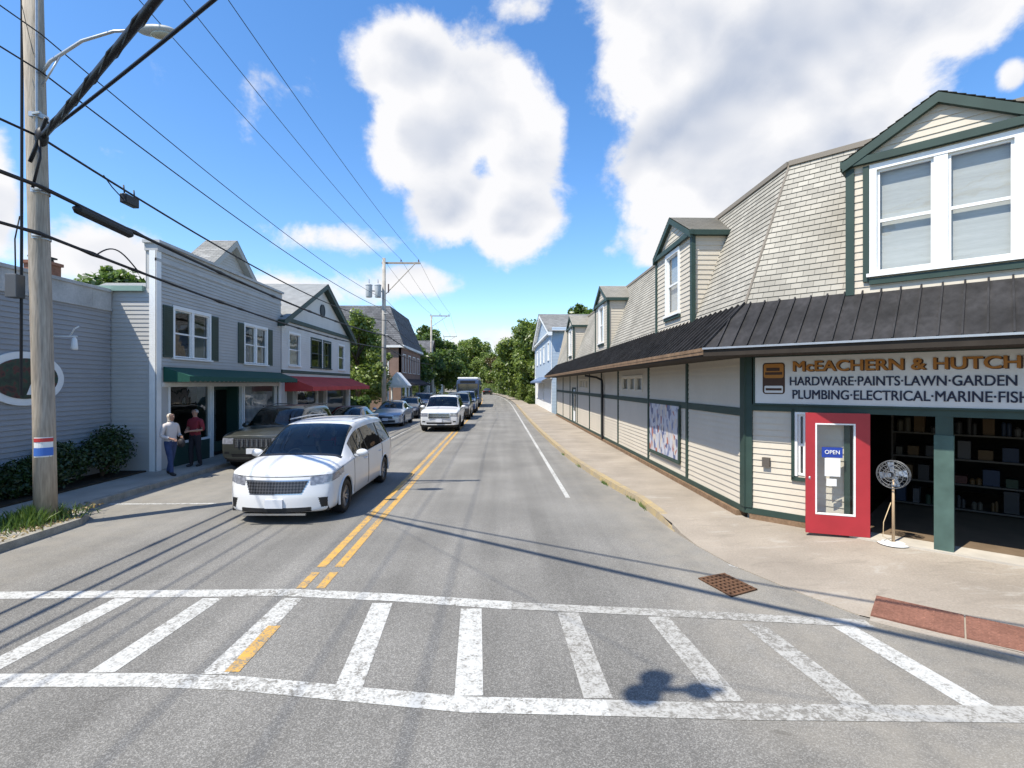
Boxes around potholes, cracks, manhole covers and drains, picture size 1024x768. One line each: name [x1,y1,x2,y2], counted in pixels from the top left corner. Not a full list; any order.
drain grate [698,573,757,597]
